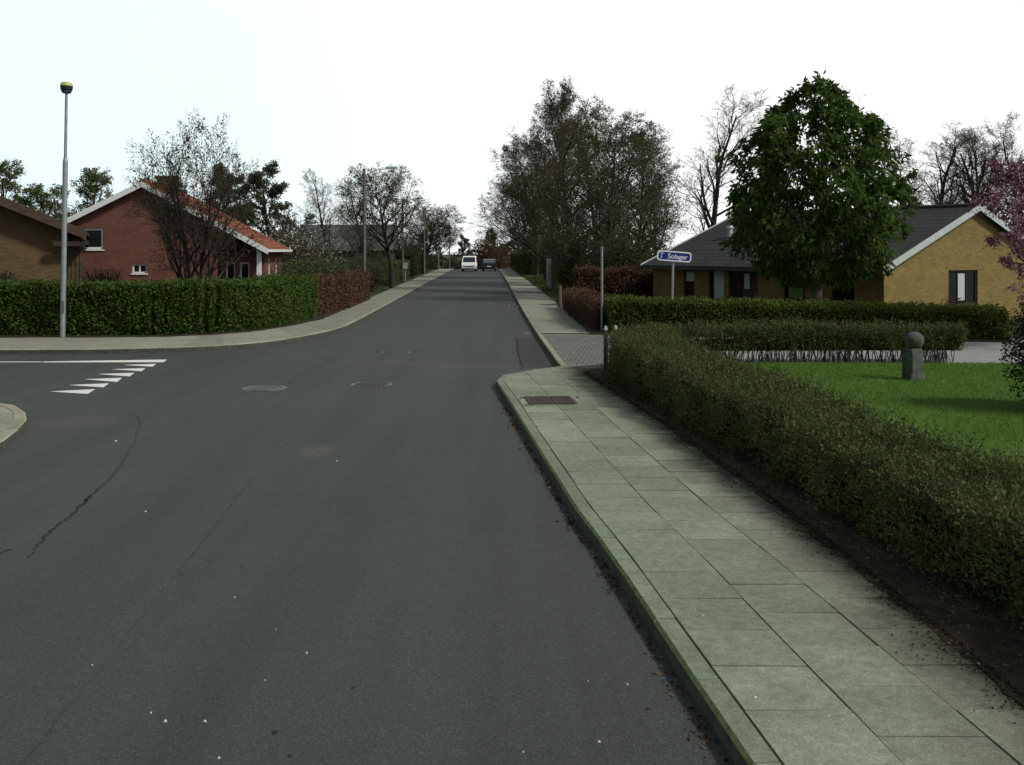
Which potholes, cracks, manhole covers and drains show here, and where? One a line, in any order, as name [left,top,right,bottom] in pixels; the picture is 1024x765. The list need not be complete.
crack [0,409,142,559]
